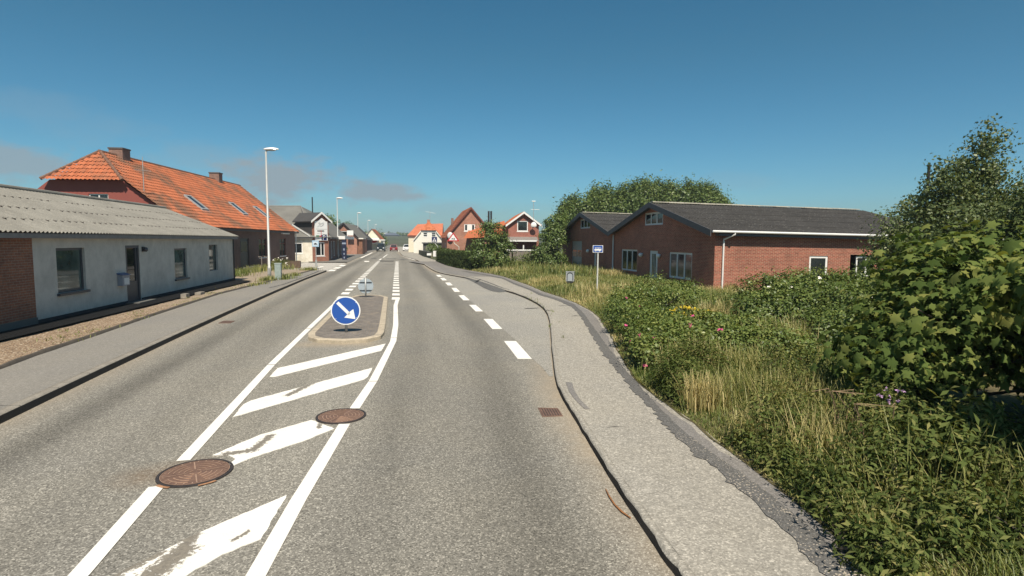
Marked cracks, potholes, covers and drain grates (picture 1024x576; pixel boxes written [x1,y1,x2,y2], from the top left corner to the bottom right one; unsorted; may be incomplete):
manhole cover [155,459,234,488]
drain grate [538,408,563,417]
manhole cover [315,408,366,424]
